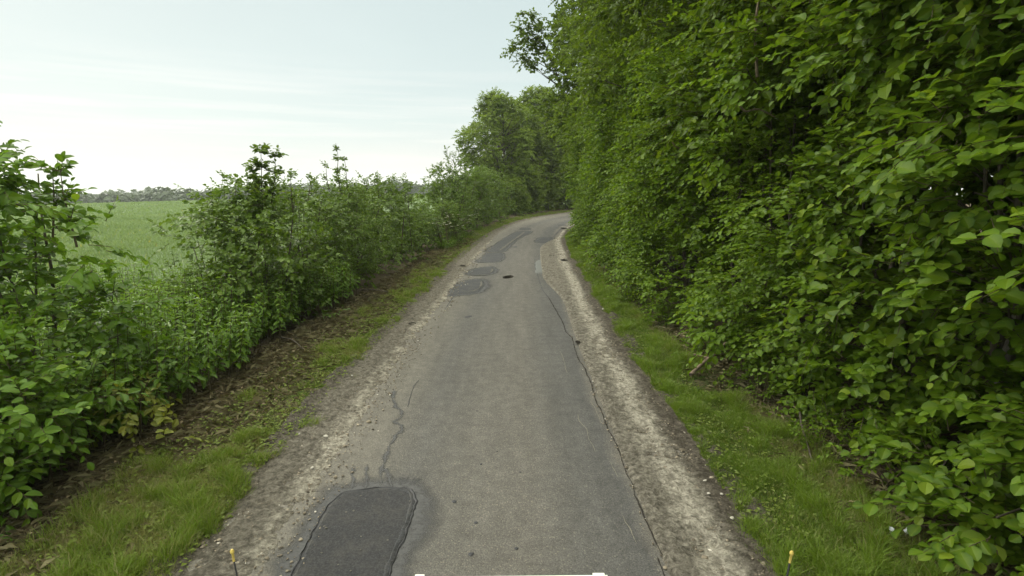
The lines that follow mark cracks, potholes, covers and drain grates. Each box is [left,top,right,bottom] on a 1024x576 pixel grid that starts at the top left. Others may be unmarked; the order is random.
crack [534,265,665,576]
crack [350,380,419,489]
